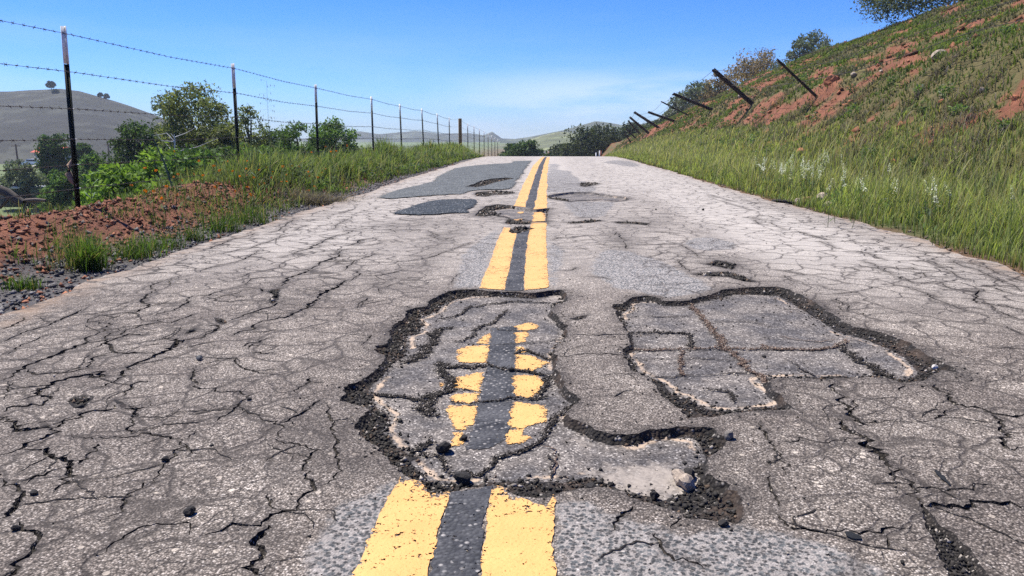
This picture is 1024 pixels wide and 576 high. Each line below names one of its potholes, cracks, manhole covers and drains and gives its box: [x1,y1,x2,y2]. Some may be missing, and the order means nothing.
pothole [475,189,515,197]
pothole [475,204,550,222]
pothole [509,225,533,233]
pothole [468,178,513,187]
crack [711,195,835,248]
pothole [327,286,812,555]
pothole [547,192,629,202]
pothole [68,395,94,409]
pothole [601,284,998,430]
crack [0,210,1024,576]
